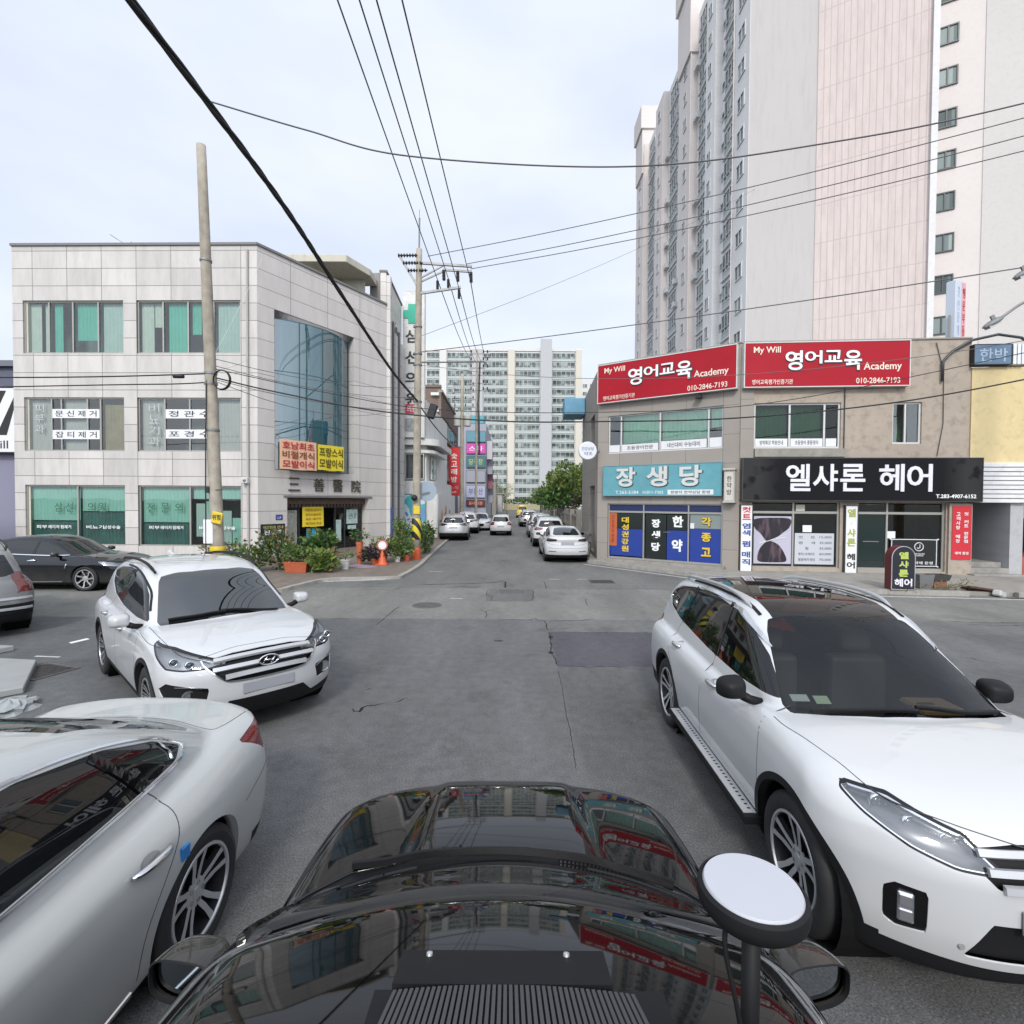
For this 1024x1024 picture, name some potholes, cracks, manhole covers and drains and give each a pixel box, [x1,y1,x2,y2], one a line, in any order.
drain grate [30,662,81,681]
crack [351,688,405,712]
crack [424,581,662,668]
